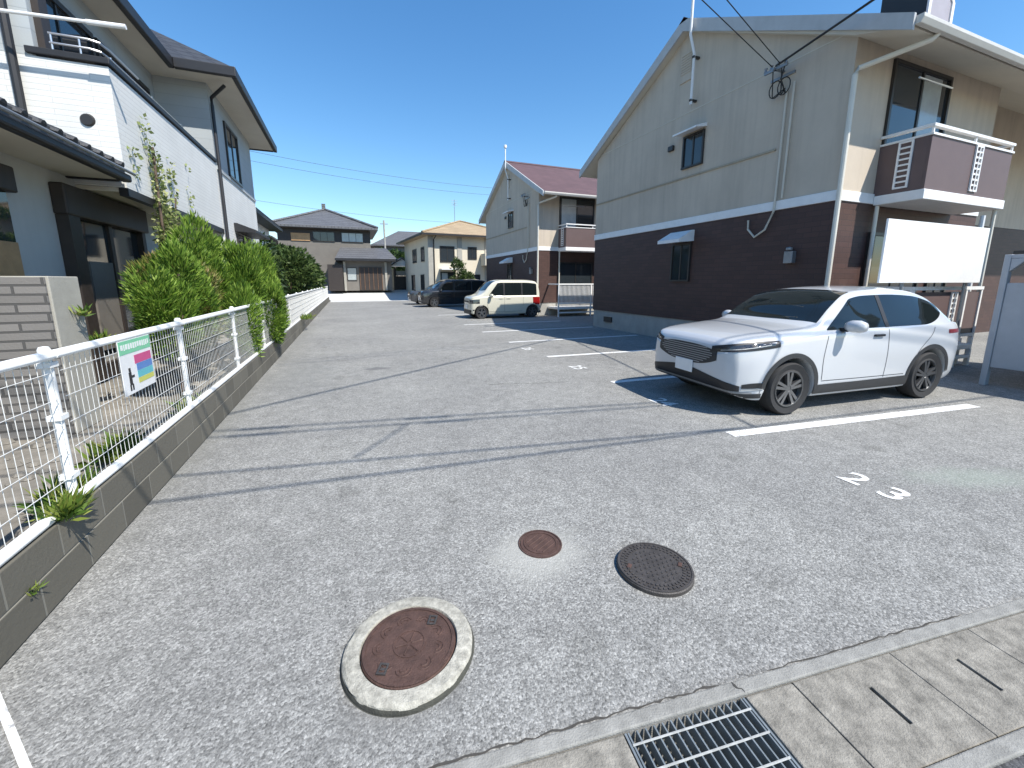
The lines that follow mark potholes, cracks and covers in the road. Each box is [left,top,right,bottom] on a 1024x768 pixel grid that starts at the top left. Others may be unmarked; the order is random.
manhole cover [617,542,695,598]
drain grate [624,698,801,768]
manhole cover [340,597,474,718]
manhole cover [518,530,562,559]
